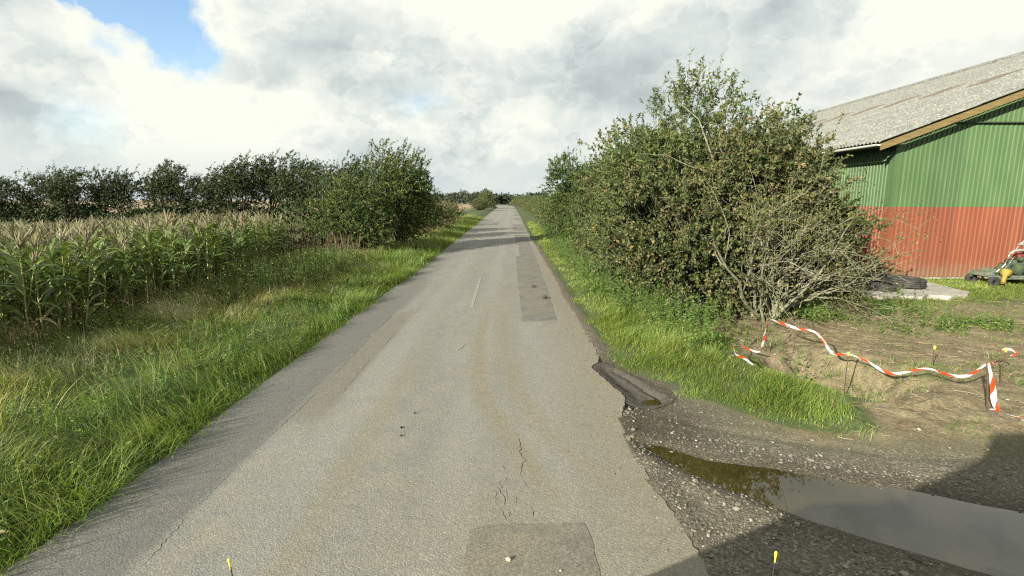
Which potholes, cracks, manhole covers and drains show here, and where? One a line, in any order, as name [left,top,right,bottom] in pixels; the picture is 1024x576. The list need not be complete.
pothole [592,362,677,409]
crack [495,426,534,521]
